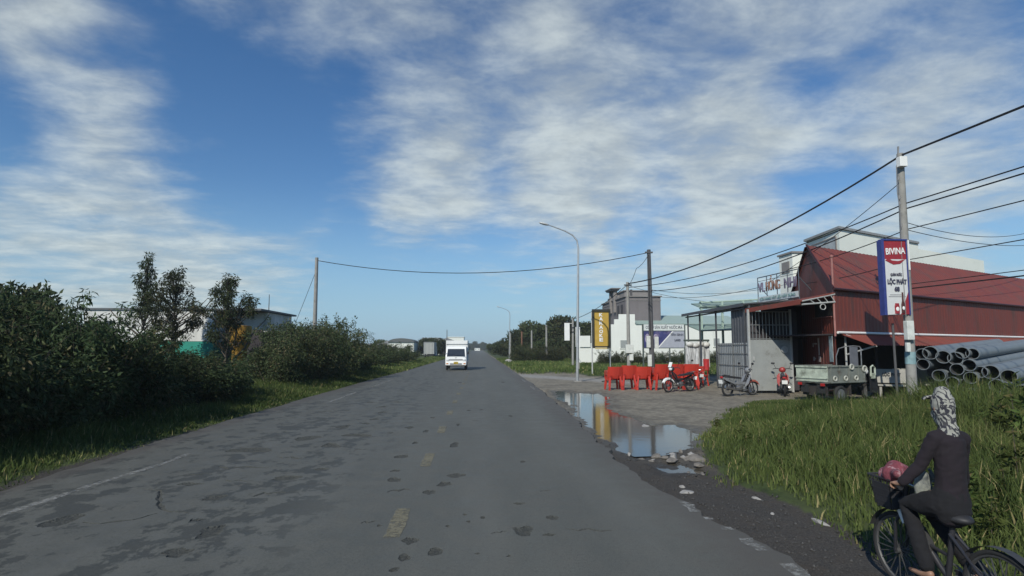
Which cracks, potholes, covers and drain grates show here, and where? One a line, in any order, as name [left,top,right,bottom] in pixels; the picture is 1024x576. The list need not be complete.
pothole [195,524,227,539]
pothole [512,526,533,536]
crack [82,456,302,524]
pothole [161,548,195,558]
